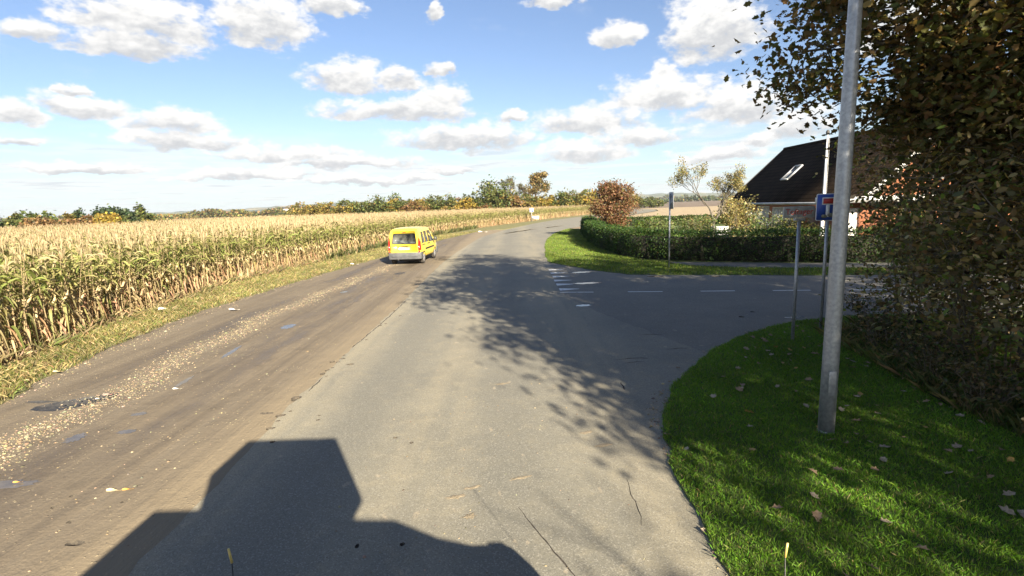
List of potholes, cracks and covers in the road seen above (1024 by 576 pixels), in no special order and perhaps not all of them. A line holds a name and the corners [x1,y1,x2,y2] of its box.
pothole [31,393,119,411]
crack [518,507,575,576]
